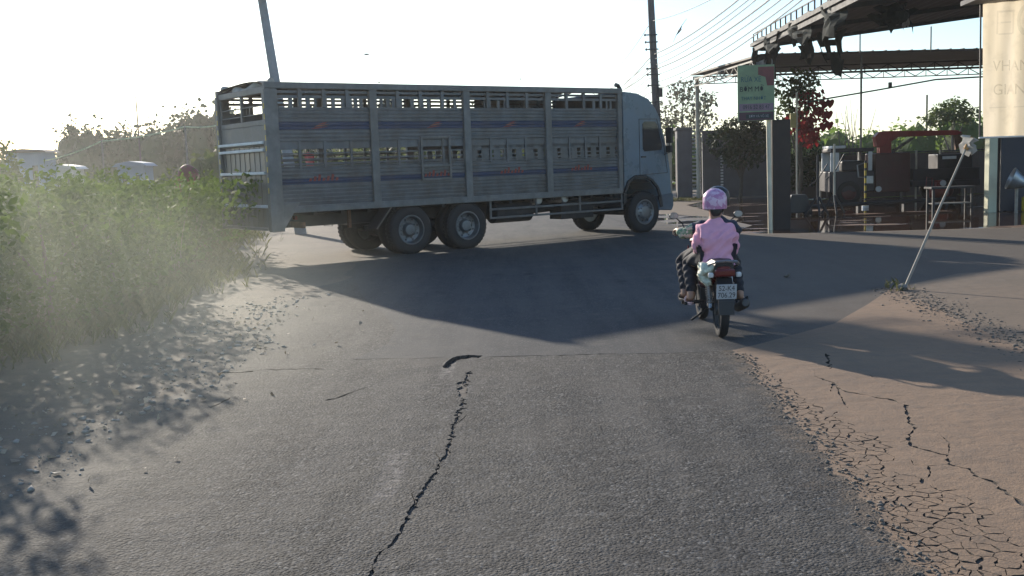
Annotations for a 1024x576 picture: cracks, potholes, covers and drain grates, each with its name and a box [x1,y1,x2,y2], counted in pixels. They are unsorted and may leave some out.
crack [738,353,1024,576]
crack [368,371,473,576]
